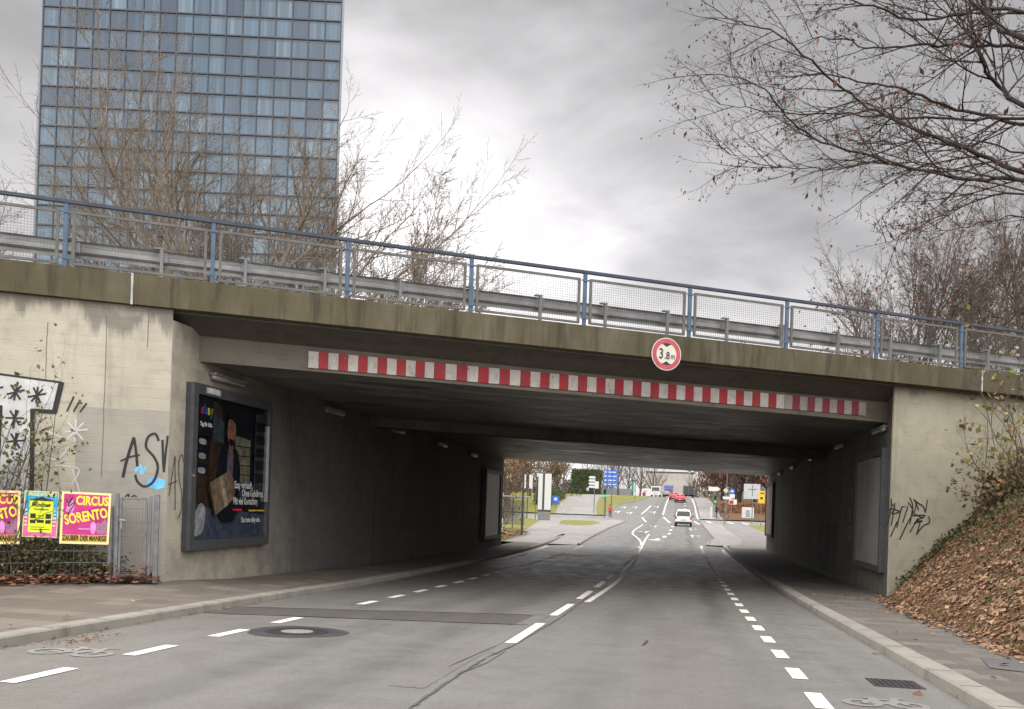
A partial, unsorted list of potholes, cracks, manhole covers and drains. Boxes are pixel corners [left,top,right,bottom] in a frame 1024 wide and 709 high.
manhole cover [247,626,349,638]
crack [408,596,589,709]
drain grate [865,678,926,690]
